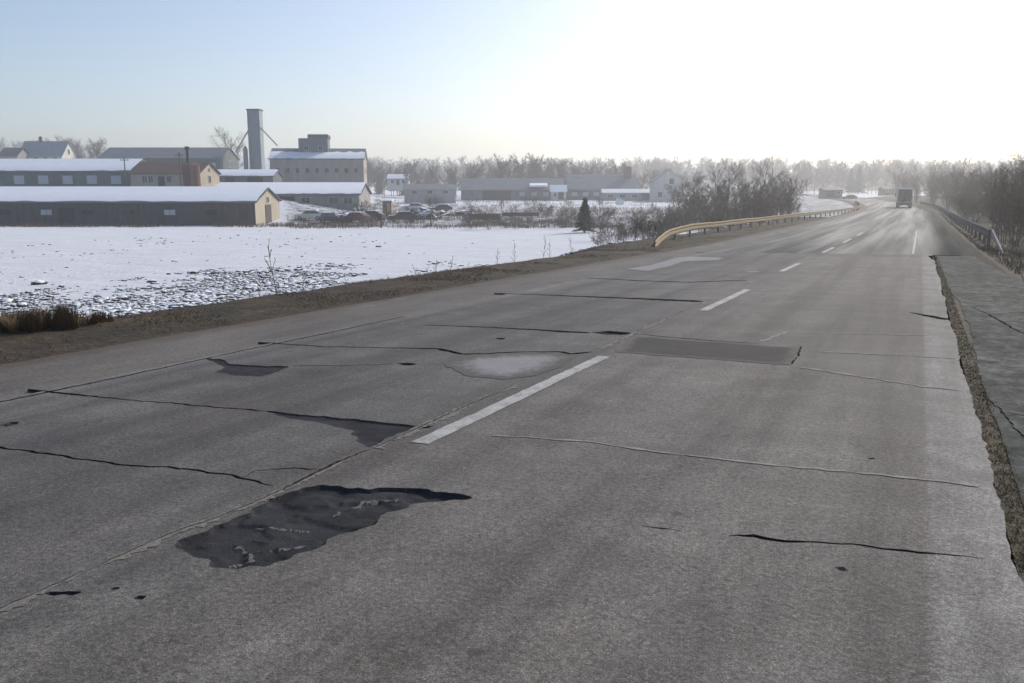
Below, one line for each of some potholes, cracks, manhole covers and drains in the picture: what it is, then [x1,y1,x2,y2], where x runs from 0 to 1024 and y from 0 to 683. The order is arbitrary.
crack [972,307,1024,334]
crack [730,534,982,559]
crack [0,316,589,411]
crack [0,446,312,486]
crack [982,391,1024,439]
pothole [175,485,476,569]
pothole [206,358,288,377]
pothole [266,411,415,448]
